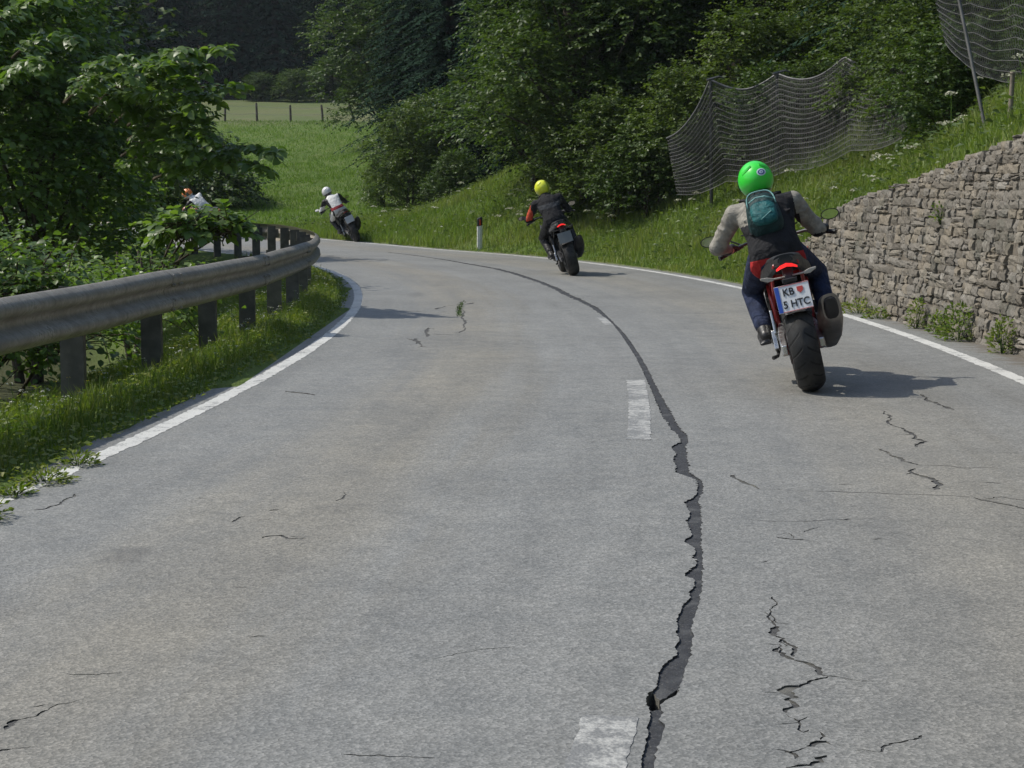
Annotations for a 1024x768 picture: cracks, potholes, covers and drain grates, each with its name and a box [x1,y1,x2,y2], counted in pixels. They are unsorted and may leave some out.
crack [764,596,859,768]
crack [0,701,75,751]
crack [409,303,473,347]
crack [730,411,1024,509]
crack [37,494,76,510]
crack [262,509,307,539]
crack [862,735,922,752]
